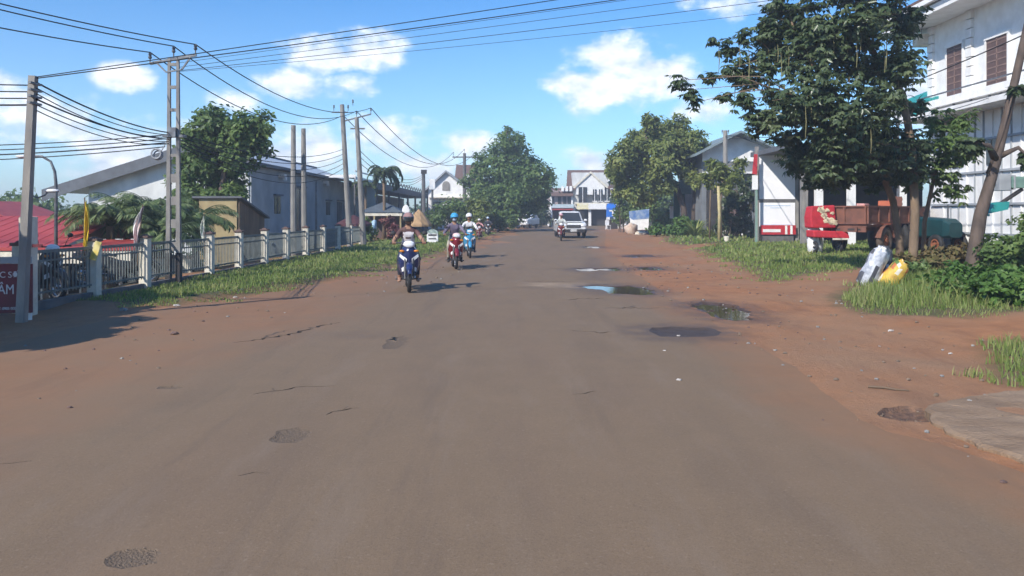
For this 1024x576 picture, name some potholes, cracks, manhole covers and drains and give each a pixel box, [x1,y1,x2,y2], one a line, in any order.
crack [234,322,340,343]
pothole [268,427,312,443]
pothole [104,547,161,569]
crack [256,386,324,394]
pothole [690,302,754,321]
pothole [382,336,411,349]
pothole [579,285,659,295]
pothole [875,405,930,422]
